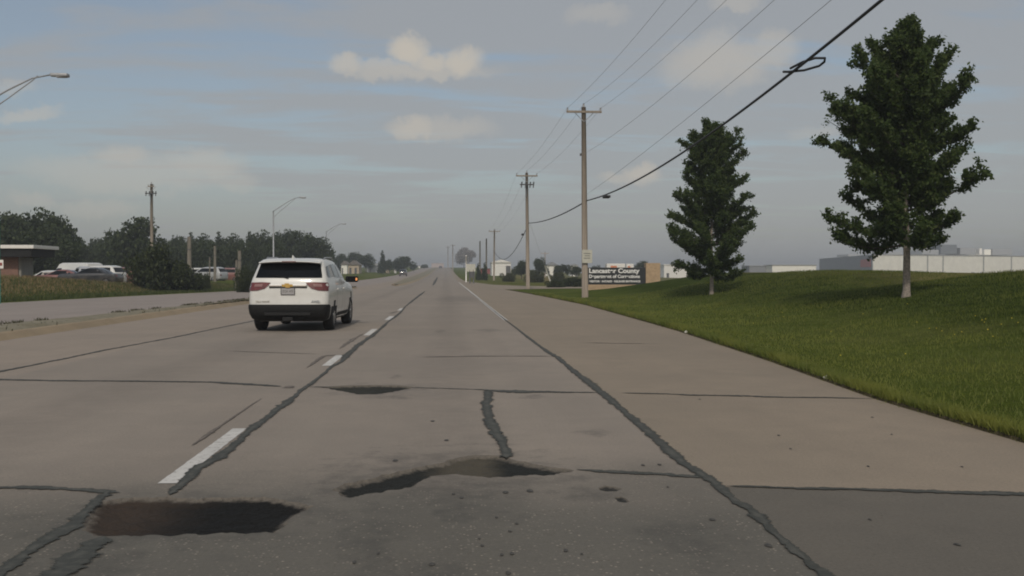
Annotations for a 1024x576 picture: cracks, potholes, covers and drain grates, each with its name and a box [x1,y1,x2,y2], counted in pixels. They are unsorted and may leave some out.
pothole [82,496,313,537]
pothole [332,455,574,498]
pothole [322,385,413,395]
